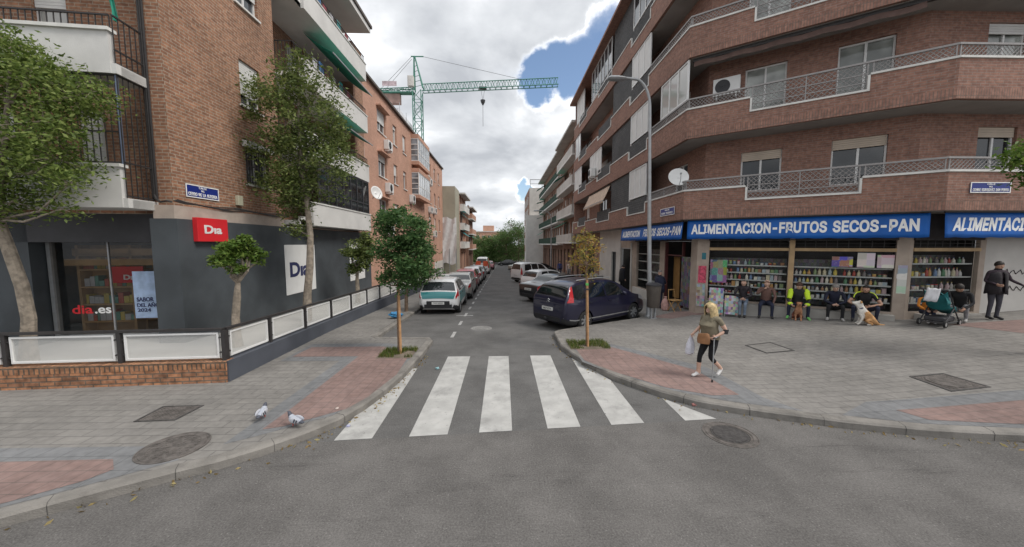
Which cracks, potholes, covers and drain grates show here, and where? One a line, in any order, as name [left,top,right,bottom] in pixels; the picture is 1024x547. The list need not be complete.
utility cover [745,342,795,353]
utility cover [909,373,991,392]
manhole cover [702,422,760,448]
manhole cover [132,431,211,465]
utility cover [133,405,204,422]
